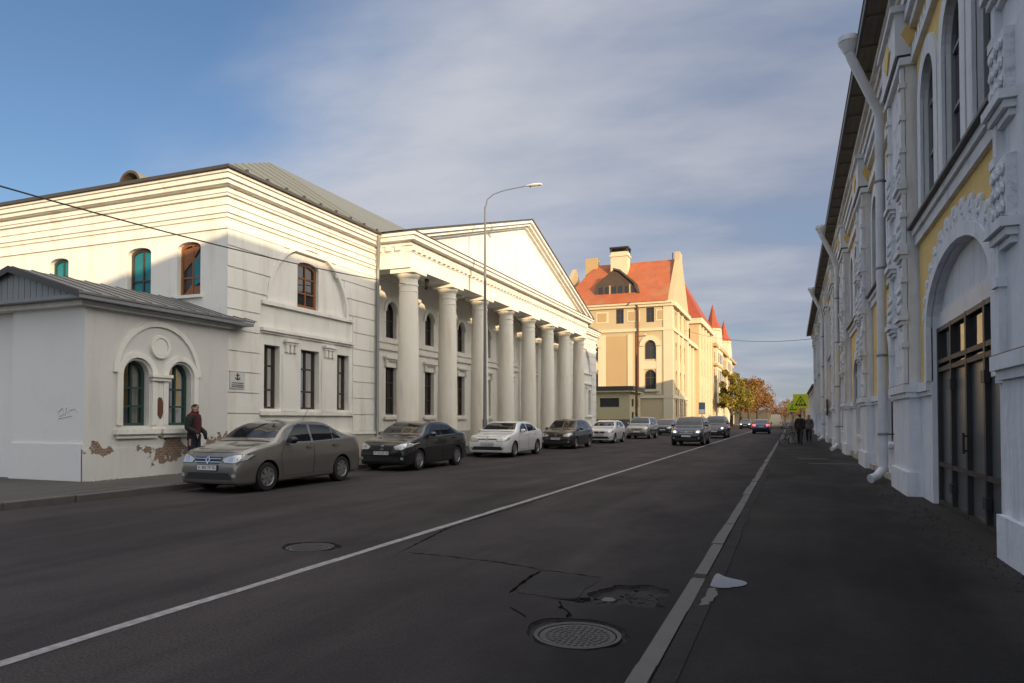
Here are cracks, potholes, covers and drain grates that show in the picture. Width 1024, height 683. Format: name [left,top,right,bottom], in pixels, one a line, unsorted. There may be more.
manhole cover [527,619,629,651]
pothole [566,585,671,608]
manhole cover [282,542,342,552]
crack [407,496,593,618]
